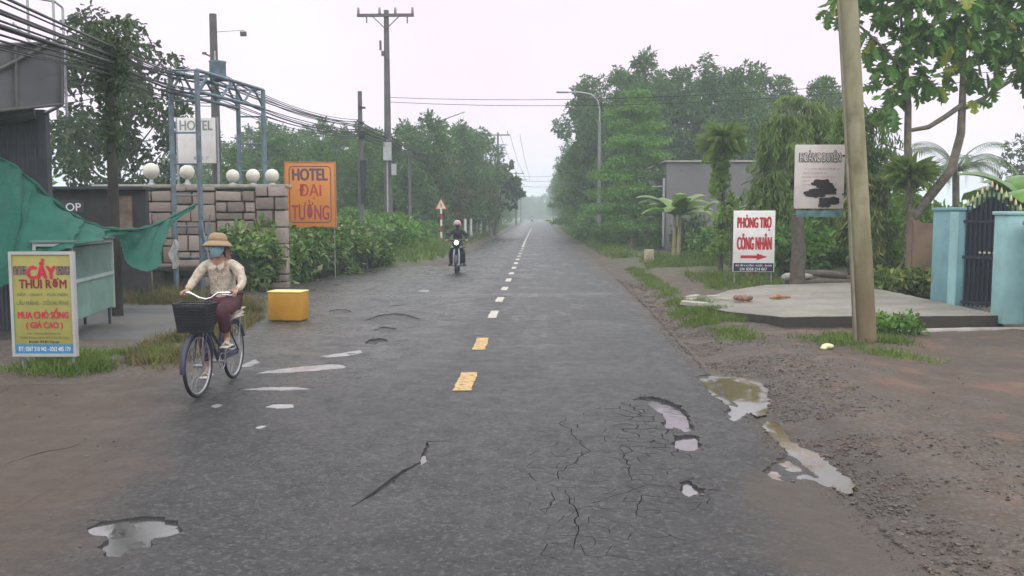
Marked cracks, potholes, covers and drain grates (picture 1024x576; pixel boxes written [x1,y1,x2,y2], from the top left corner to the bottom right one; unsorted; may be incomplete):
pothole [366,313,420,324]
crack [353,441,455,506]
pothole [697,374,771,421]
pothole [671,435,703,451]
pothole [87,516,183,557]
pothole [762,421,857,496]
crack [528,403,715,560]
pothole [633,396,694,432]
pothole [679,480,705,497]
